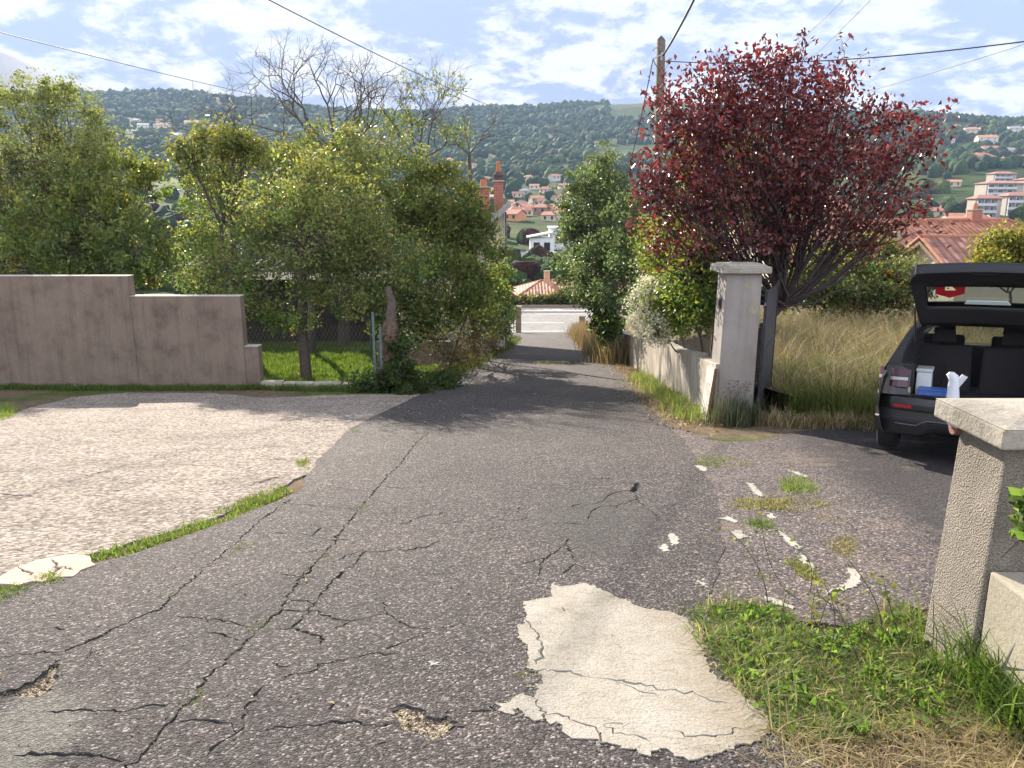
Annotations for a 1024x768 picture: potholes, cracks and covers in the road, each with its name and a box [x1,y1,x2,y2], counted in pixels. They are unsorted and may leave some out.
crack [675,727,741,737]
crack [529,669,728,703]
crack [520,473,666,576]
pothole [0,659,63,700]
crack [448,705,496,731]
pothole [390,704,459,742]
crack [537,706,651,744]
crack [0,433,454,768]
